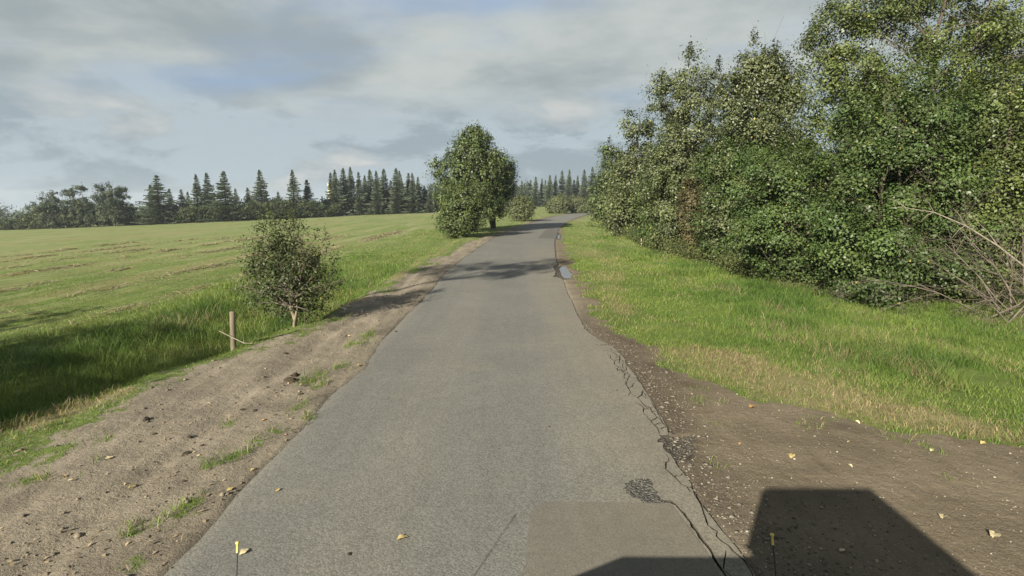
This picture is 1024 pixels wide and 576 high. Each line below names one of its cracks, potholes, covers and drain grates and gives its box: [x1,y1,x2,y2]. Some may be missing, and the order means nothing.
pothole [623,478,664,503]
